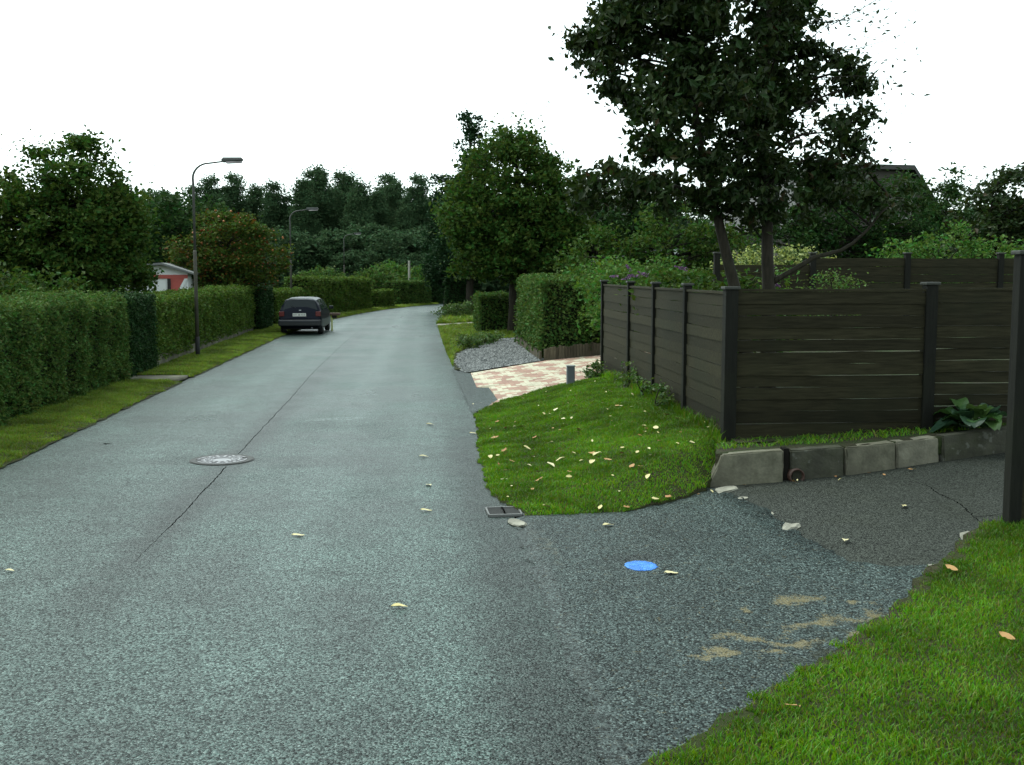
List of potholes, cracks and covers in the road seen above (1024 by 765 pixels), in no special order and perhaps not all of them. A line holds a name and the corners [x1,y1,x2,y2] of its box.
drain grate [485,506,523,517]
crack [919,483,1000,521]
manhole cover [189,454,255,466]
